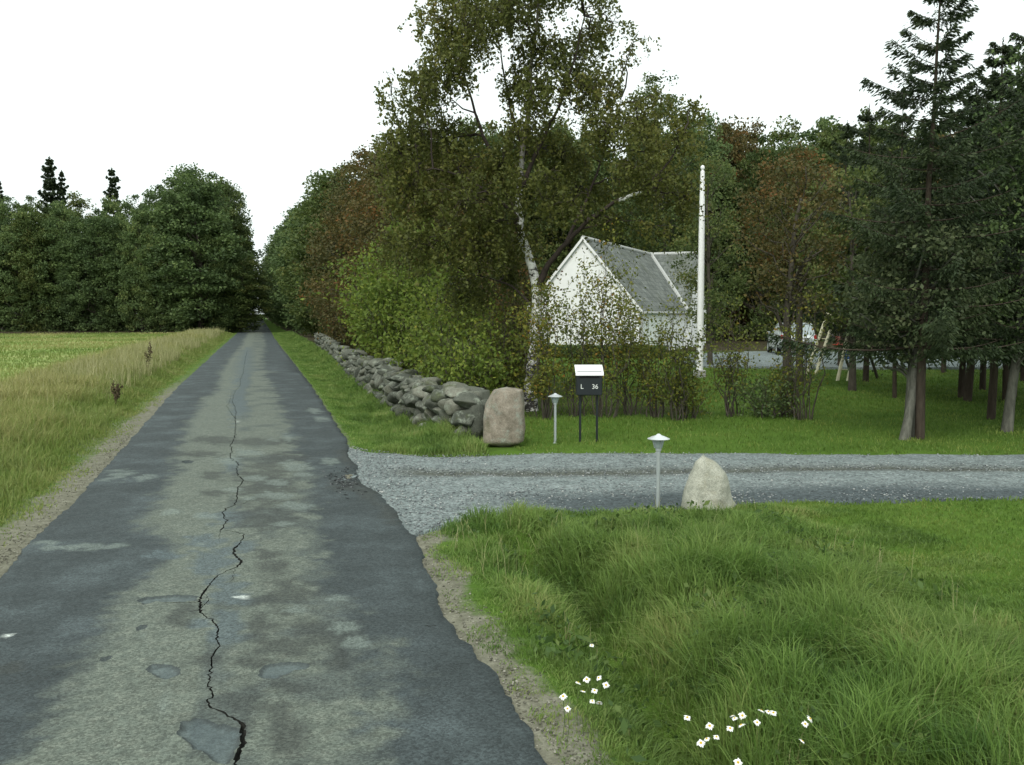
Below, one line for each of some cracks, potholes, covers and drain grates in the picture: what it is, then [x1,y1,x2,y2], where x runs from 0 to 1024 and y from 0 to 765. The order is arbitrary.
pothole [326,471,359,481]
crack [143,353,269,765]
